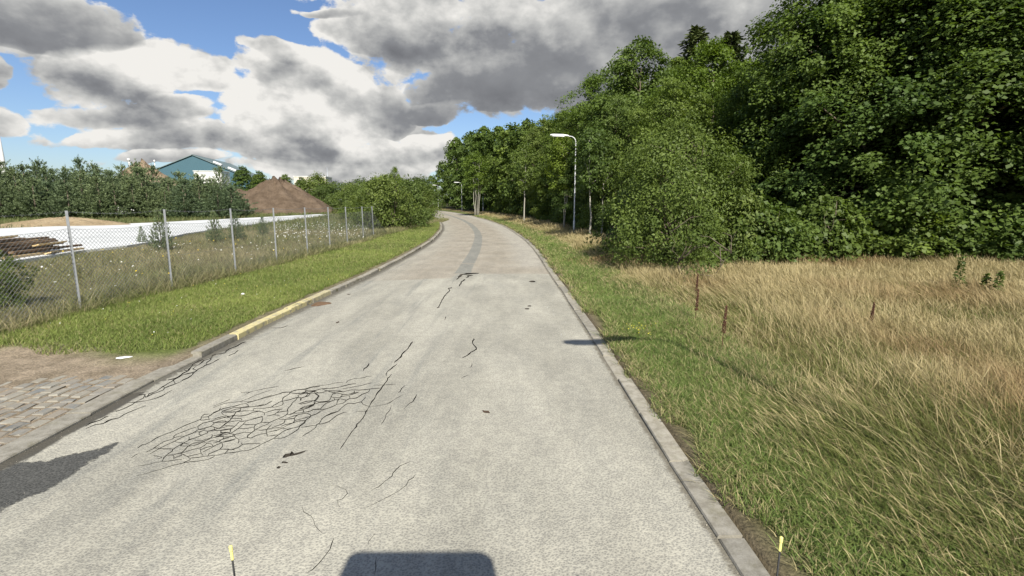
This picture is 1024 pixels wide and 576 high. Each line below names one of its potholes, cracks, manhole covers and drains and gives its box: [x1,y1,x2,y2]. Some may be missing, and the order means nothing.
crack [86,342,244,429]
crack [131,341,417,476]
crack [368,461,415,507]
